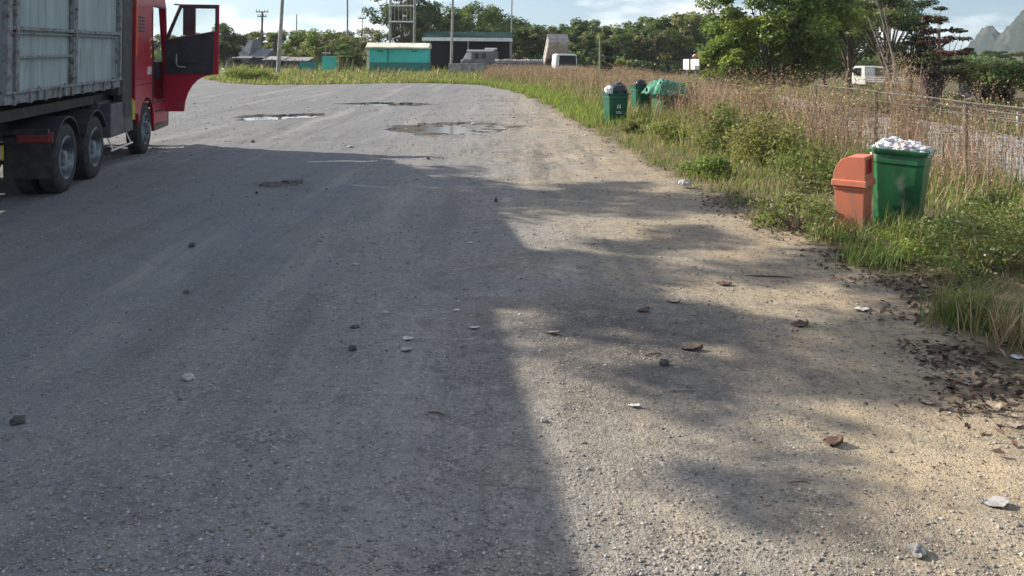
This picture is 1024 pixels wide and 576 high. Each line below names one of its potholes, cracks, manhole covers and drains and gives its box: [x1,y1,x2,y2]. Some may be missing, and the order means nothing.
pothole [230,113,333,121]
pothole [377,121,532,138]
pothole [240,179,313,191]
